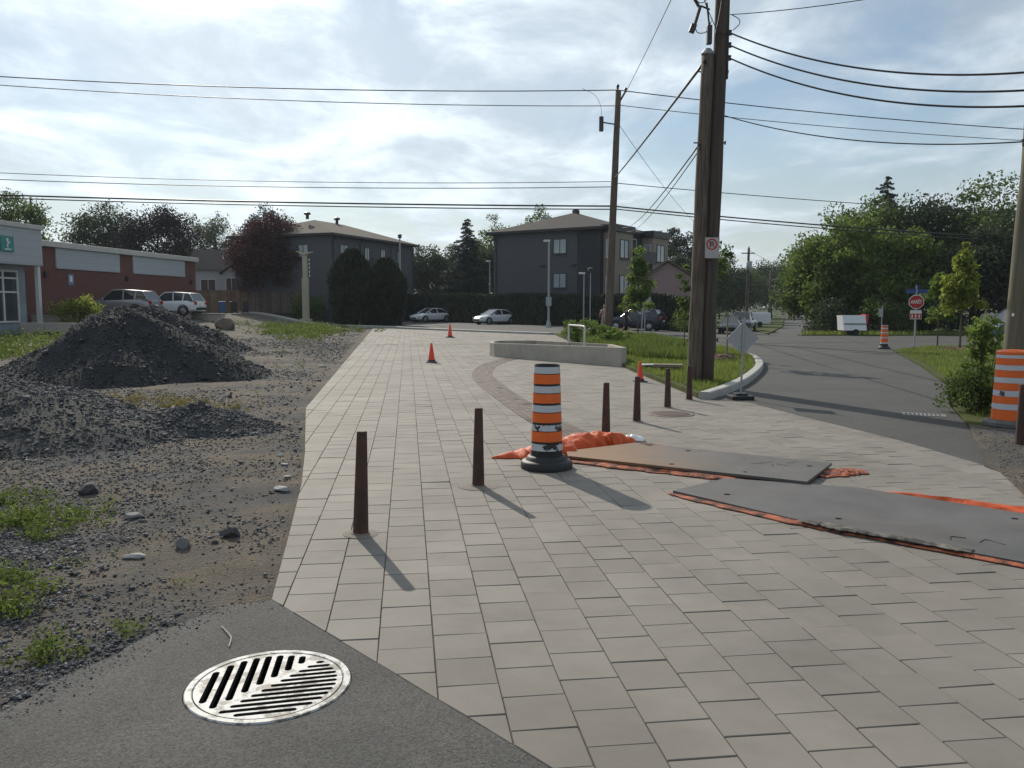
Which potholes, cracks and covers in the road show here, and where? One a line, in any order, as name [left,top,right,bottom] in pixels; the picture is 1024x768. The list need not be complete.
drain grate [183,650,351,726]
